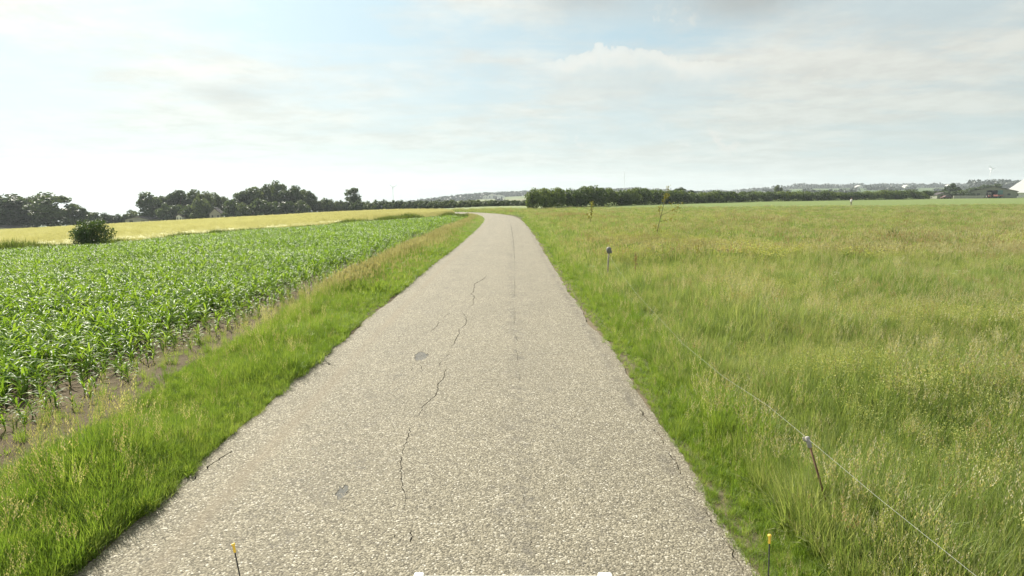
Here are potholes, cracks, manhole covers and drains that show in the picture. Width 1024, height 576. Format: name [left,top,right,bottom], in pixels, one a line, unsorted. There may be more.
crack [394,279,483,543]
